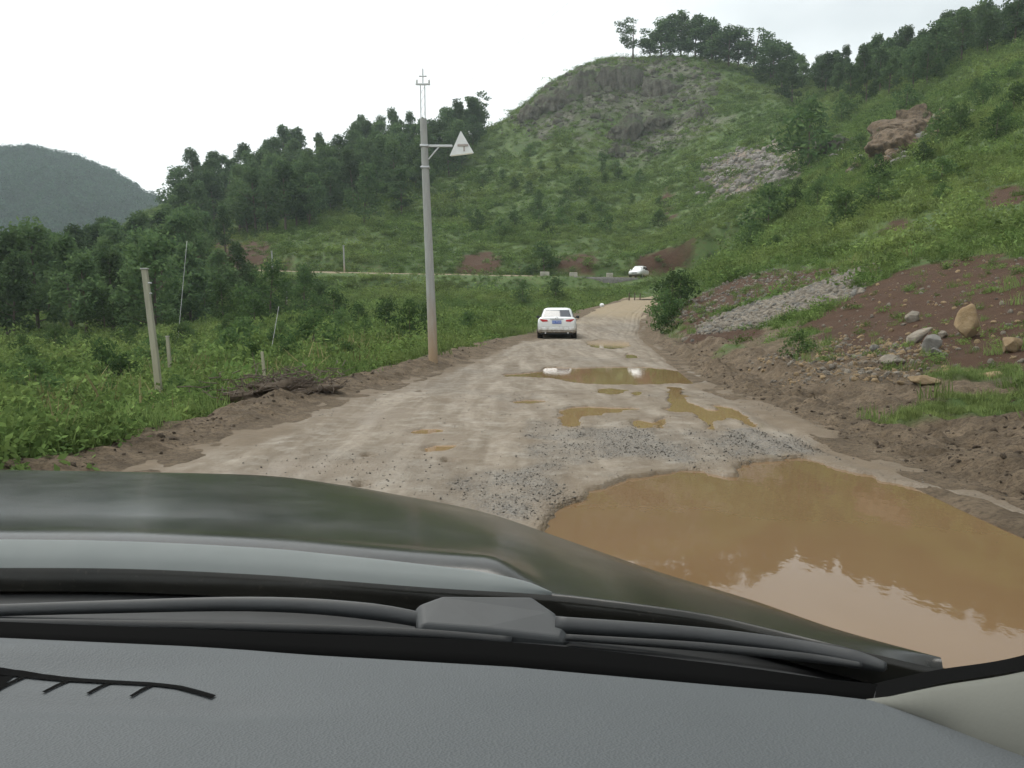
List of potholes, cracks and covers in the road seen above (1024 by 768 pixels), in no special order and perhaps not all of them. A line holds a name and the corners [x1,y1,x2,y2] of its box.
pothole [659,387,763,431]
pothole [625,417,662,429]
pothole [501,366,705,385]
pothole [583,339,632,349]
pothole [416,442,465,453]
pothole [549,405,643,427]
pothole [537,454,1024,668]
